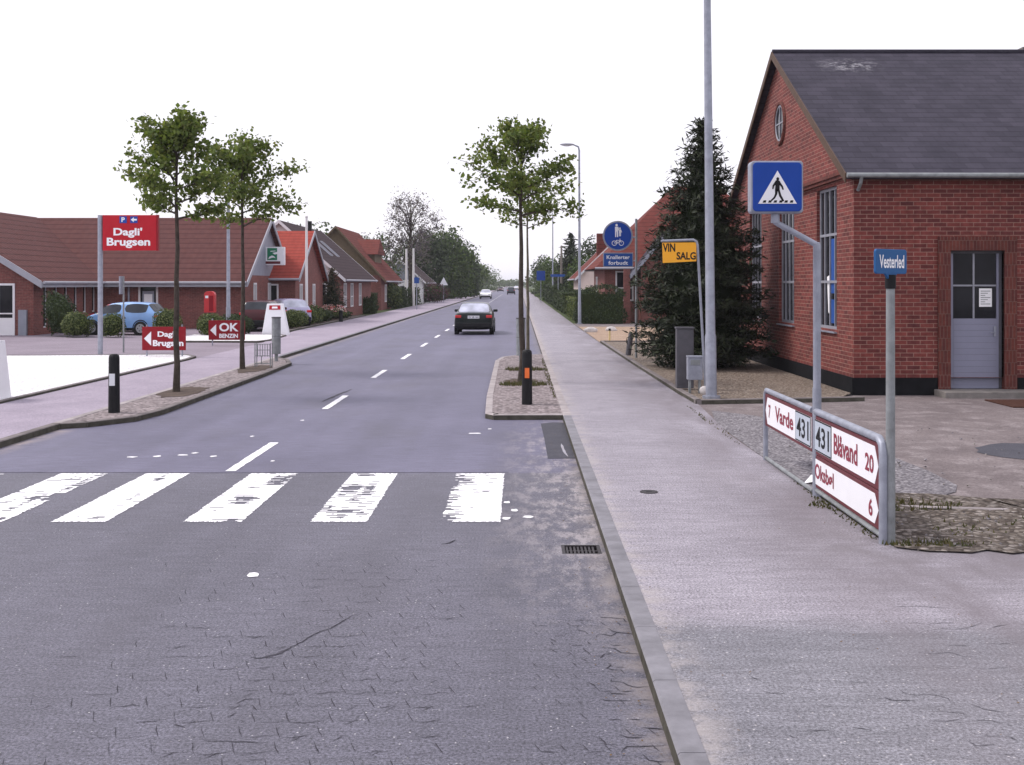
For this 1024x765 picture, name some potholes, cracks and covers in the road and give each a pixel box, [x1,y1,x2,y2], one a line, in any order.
drain grate [561,545,602,554]
crack [0,546,488,765]
crack [532,617,665,765]
